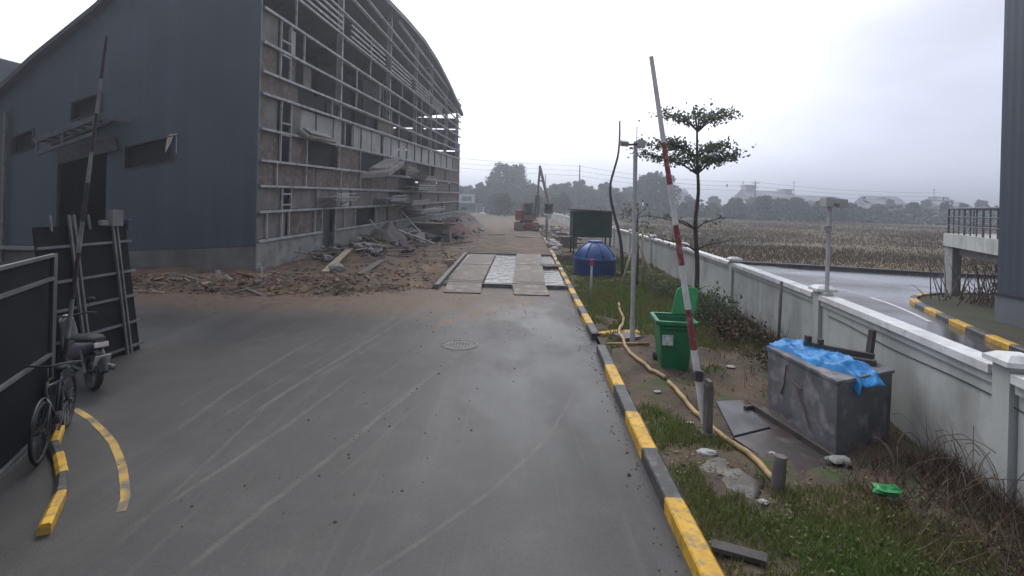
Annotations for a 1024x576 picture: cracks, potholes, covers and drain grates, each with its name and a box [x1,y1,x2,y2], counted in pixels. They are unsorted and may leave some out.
manhole cover [441,339,479,350]
